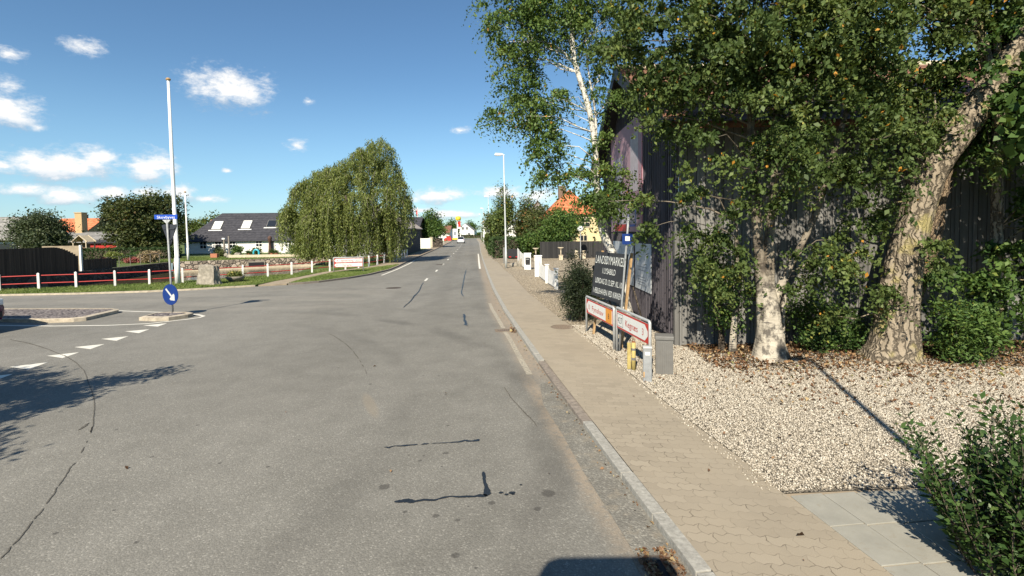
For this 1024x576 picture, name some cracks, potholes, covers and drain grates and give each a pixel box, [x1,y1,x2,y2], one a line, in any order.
crack [0,339,95,558]
